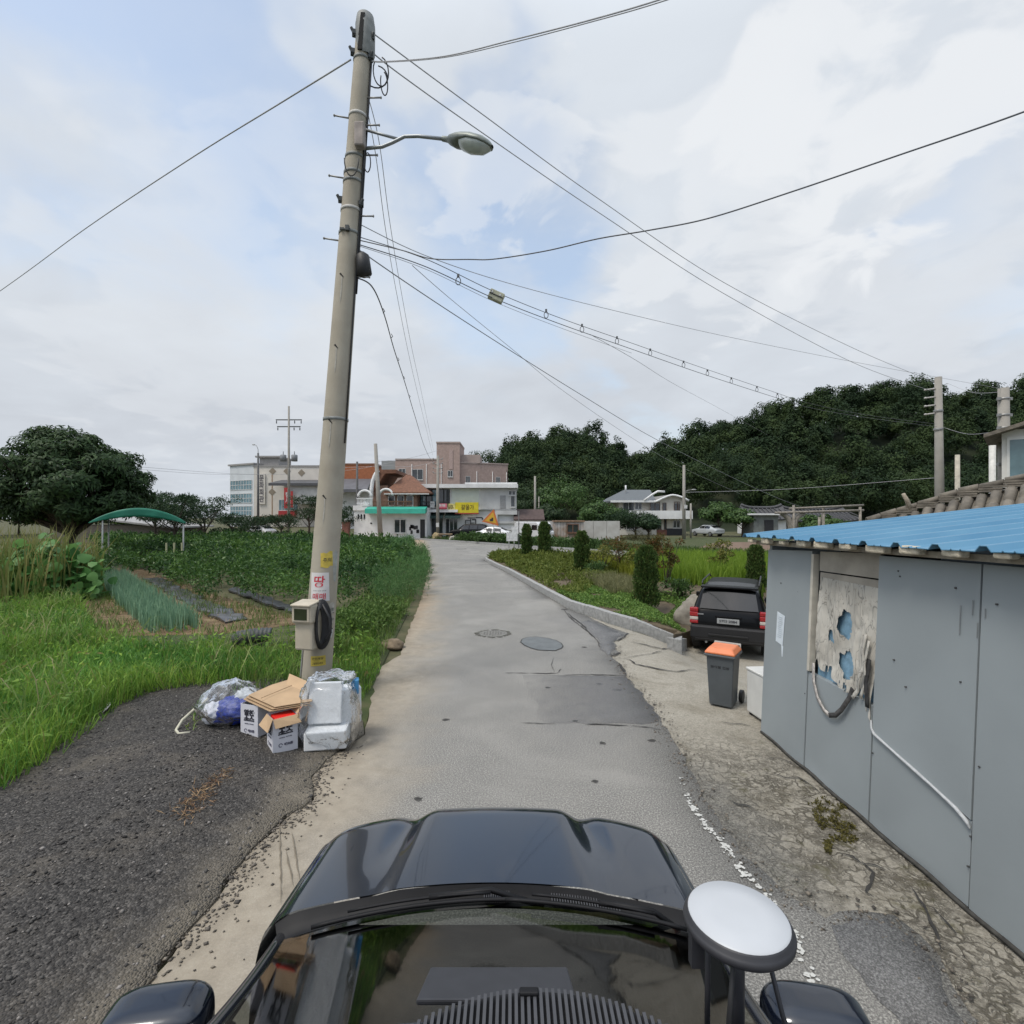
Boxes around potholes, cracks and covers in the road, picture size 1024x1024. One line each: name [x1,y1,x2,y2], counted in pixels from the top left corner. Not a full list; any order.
manhole cover [520,636,563,651]
manhole cover [475,629,511,638]
crack [543,611,695,676]
crack [842,853,888,896]
crack [911,887,958,949]
